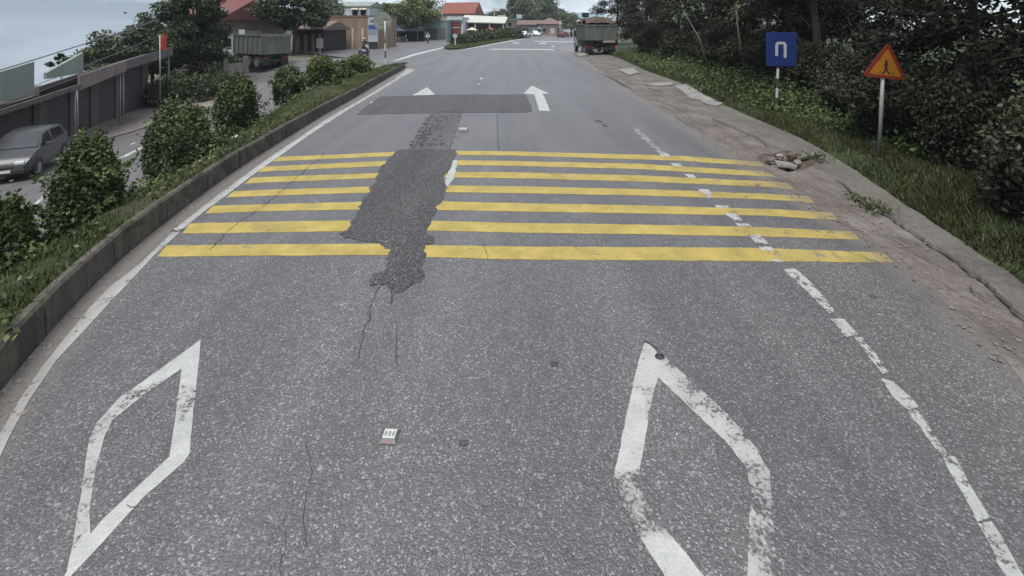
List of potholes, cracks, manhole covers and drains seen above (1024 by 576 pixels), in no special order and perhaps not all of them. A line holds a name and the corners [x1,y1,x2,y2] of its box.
crack [210,153,324,249]
crack [357,272,398,365]
pothole [758,150,817,172]
crack [279,441,313,574]
